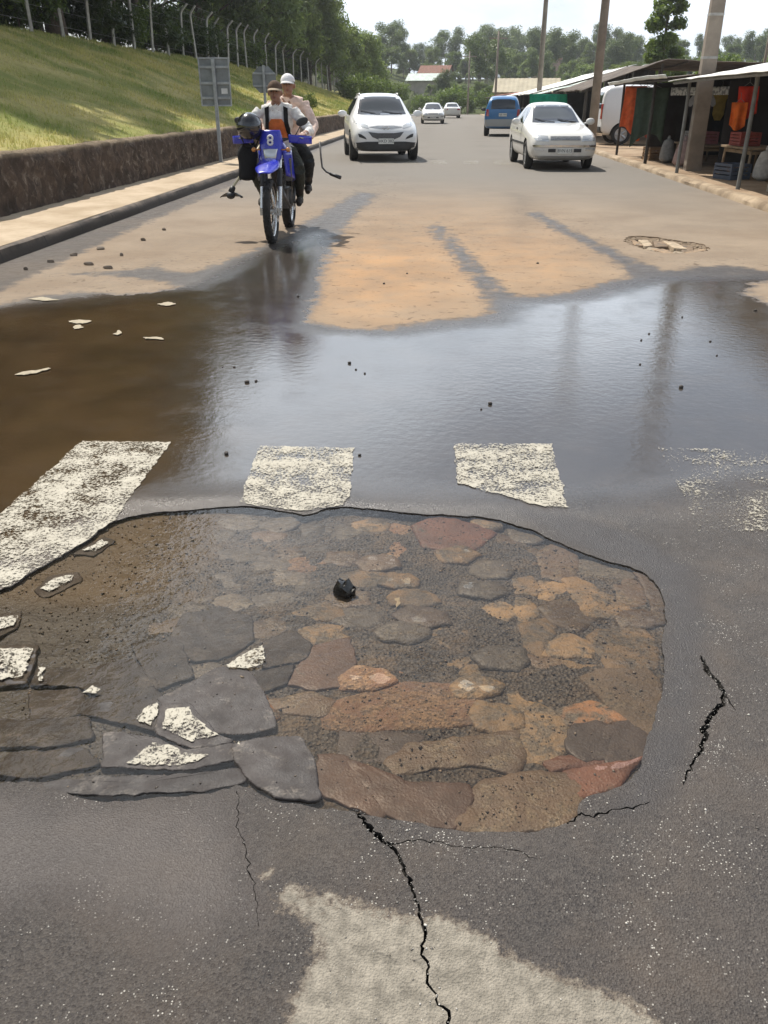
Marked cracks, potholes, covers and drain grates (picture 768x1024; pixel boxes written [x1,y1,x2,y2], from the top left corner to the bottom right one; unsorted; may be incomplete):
pothole [624,236,710,253]
crack [356,813,536,1024]
crack [683,655,736,785]
crack [568,802,650,824]
pothole [0,506,667,833]
